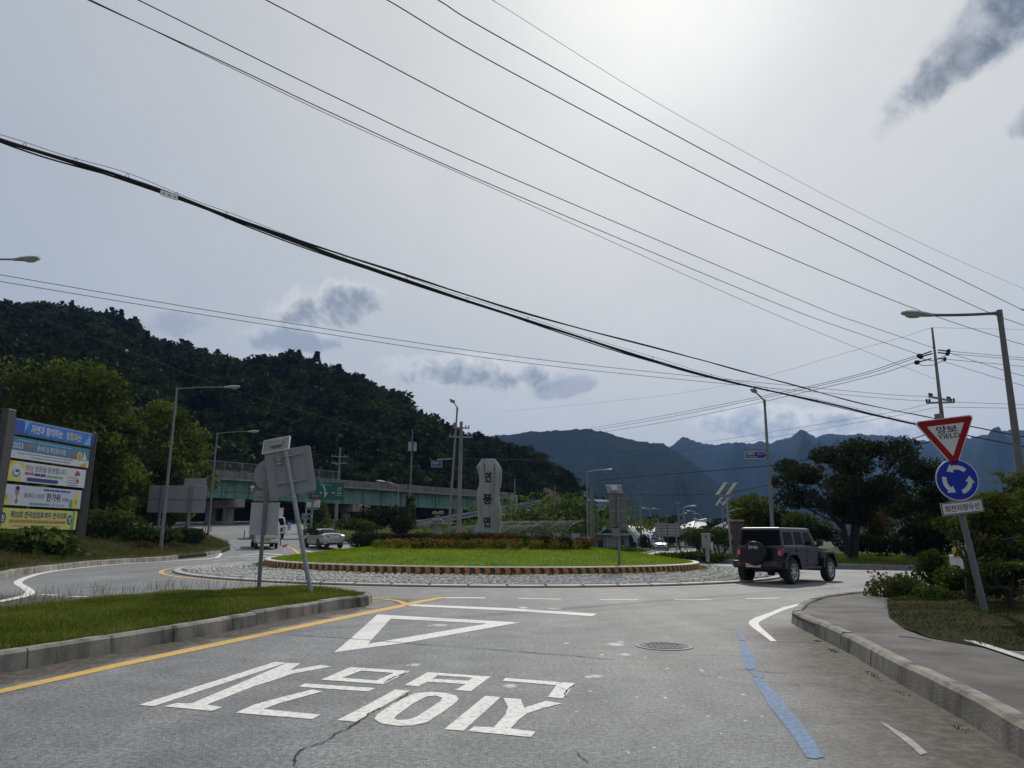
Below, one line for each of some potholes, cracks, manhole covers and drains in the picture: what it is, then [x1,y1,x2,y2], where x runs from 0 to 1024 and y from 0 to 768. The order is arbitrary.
manhole cover [636,642,693,651]
crack [293,671,408,767]
